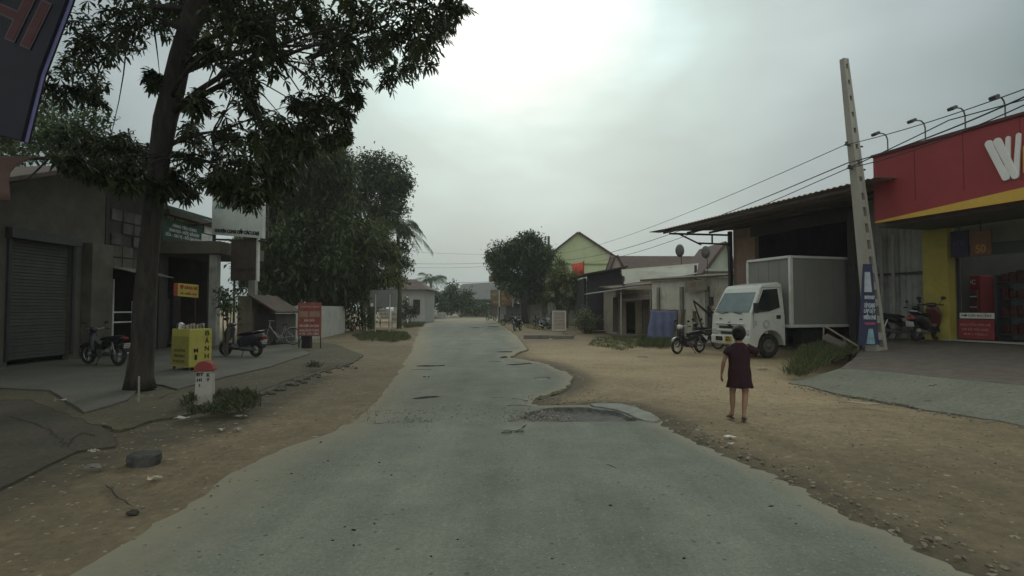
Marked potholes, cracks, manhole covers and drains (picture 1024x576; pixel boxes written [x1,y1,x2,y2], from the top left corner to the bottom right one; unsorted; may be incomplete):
pothole [521,407,637,422]
crack [10,415,96,447]
